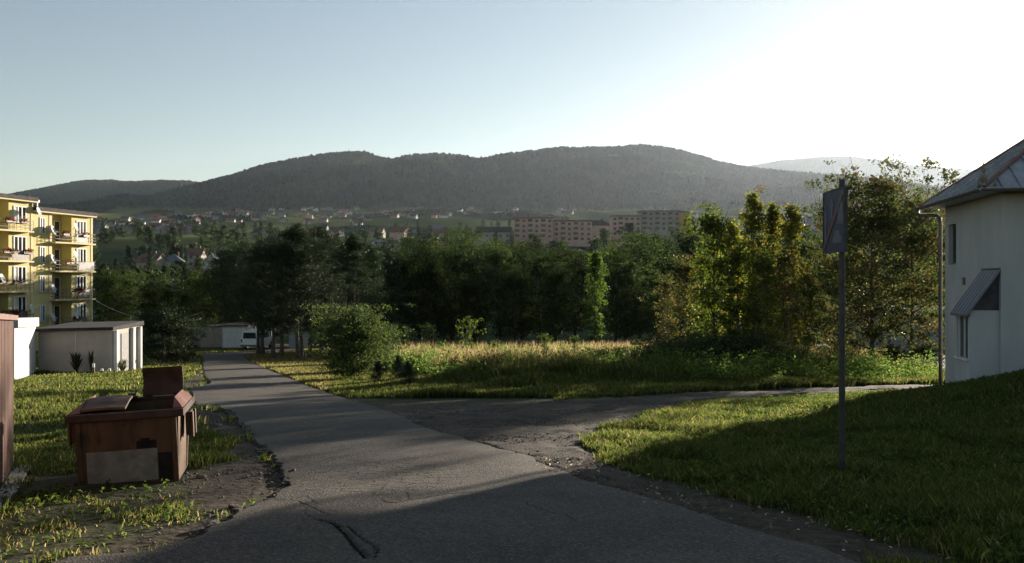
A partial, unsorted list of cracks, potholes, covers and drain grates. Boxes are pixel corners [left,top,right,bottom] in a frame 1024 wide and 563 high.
crack [269,456,469,559]
